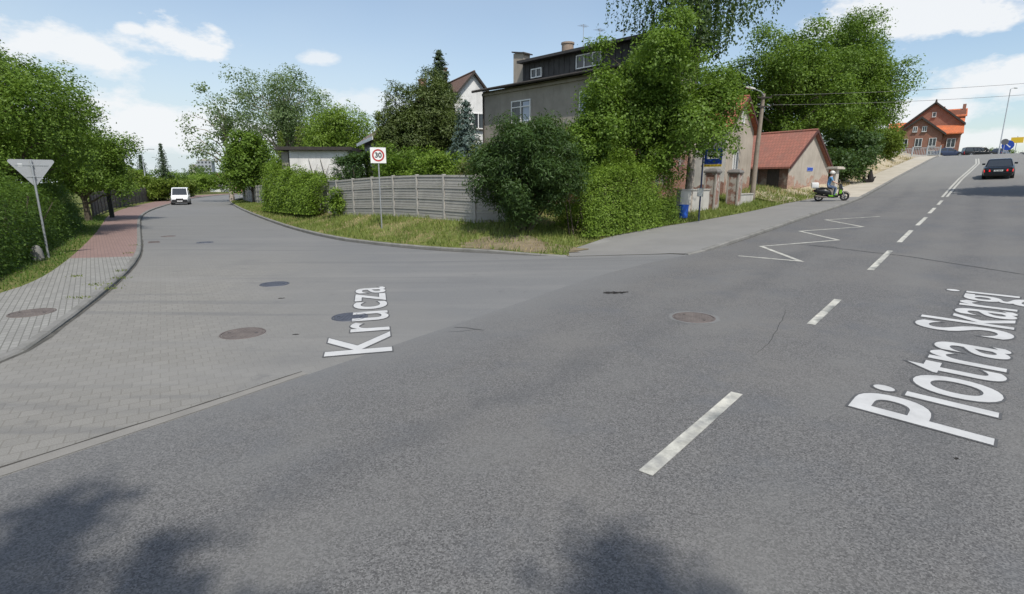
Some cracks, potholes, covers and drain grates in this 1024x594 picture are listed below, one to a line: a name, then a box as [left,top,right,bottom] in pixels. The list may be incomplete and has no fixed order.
manhole cover [219,327,266,340]
manhole cover [669,311,721,324]
manhole cover [6,308,57,318]
